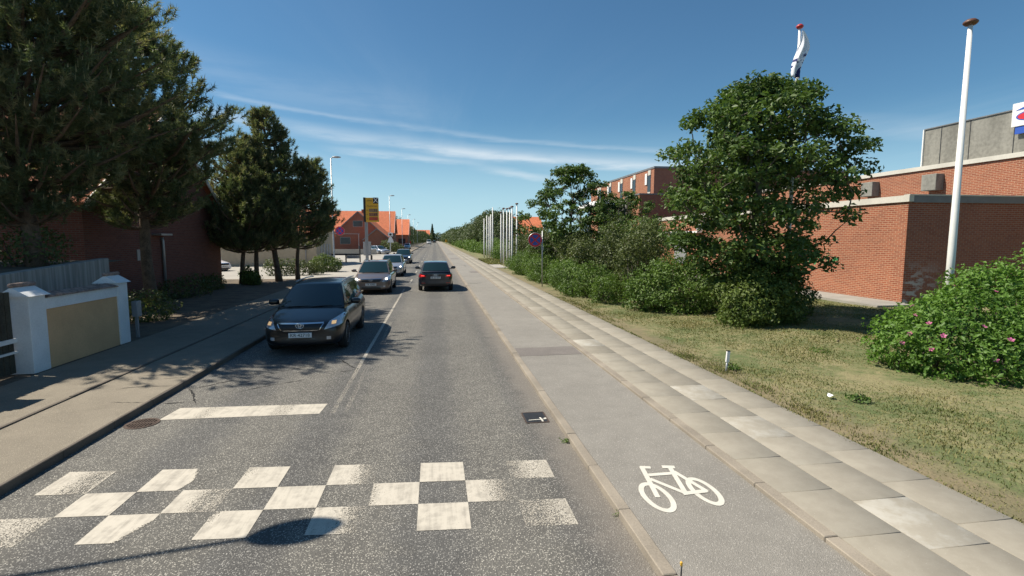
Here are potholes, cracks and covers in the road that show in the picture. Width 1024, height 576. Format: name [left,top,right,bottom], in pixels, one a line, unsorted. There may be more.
manhole cover [123,418,161,429]
manhole cover [521,411,550,423]
